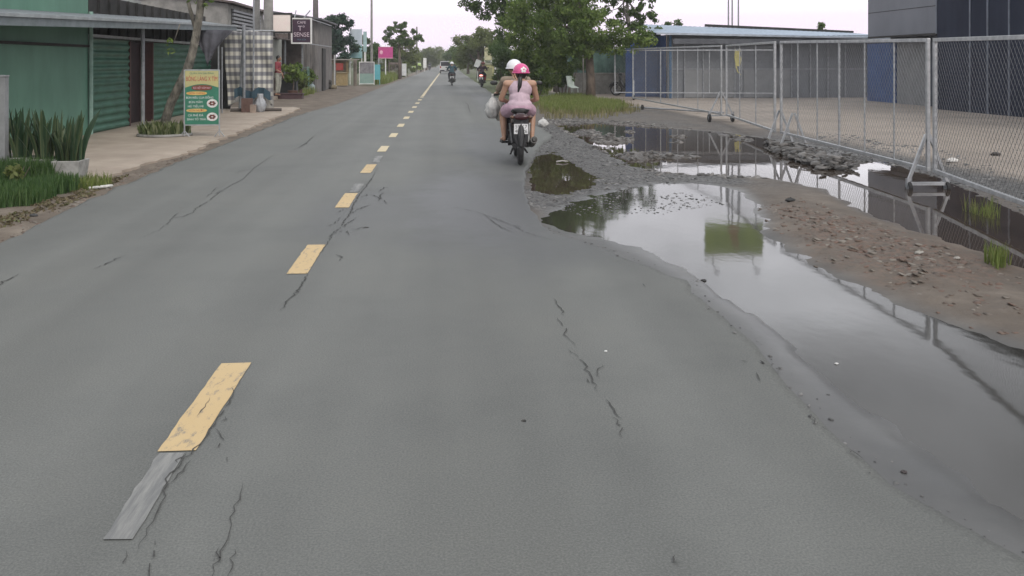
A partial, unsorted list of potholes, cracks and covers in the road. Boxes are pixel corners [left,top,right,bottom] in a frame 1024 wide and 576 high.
crack [319,173,387,261]
crack [94,157,270,269]
pothole [524,152,605,195]
crack [553,298,623,437]
pothole [538,214,614,242]
